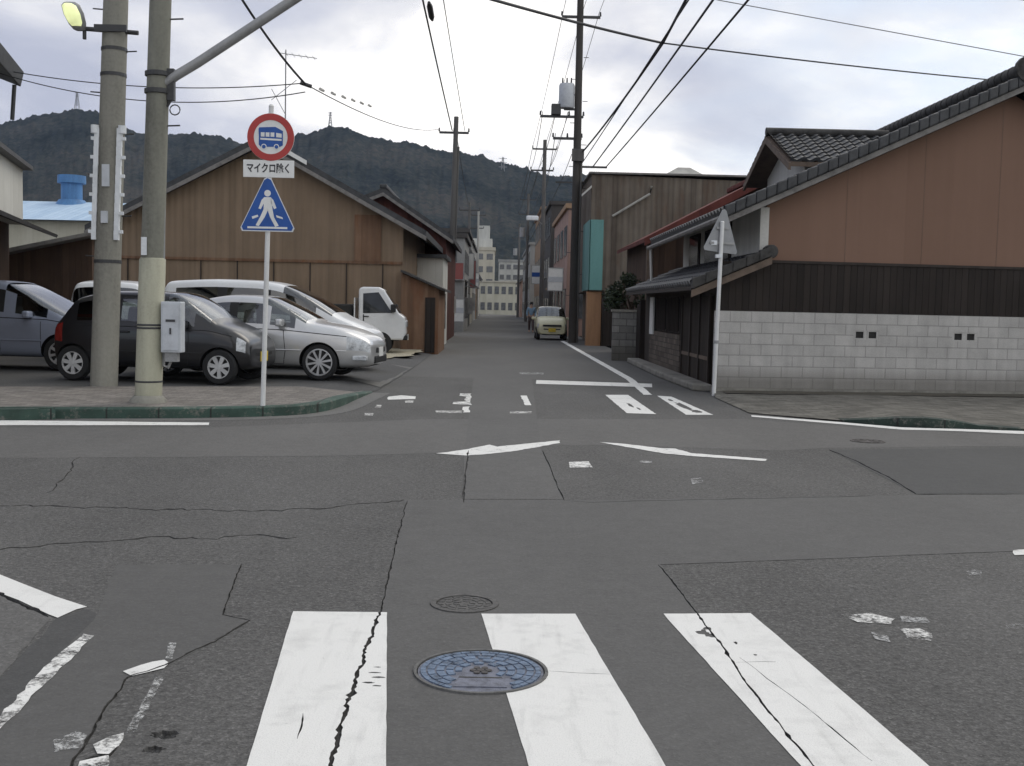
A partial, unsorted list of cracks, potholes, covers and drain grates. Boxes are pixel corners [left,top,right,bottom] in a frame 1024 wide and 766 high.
crack [659,566,855,766]
manhole cover [430,594,498,613]
crack [15,458,407,766]
manhole cover [413,649,548,695]
